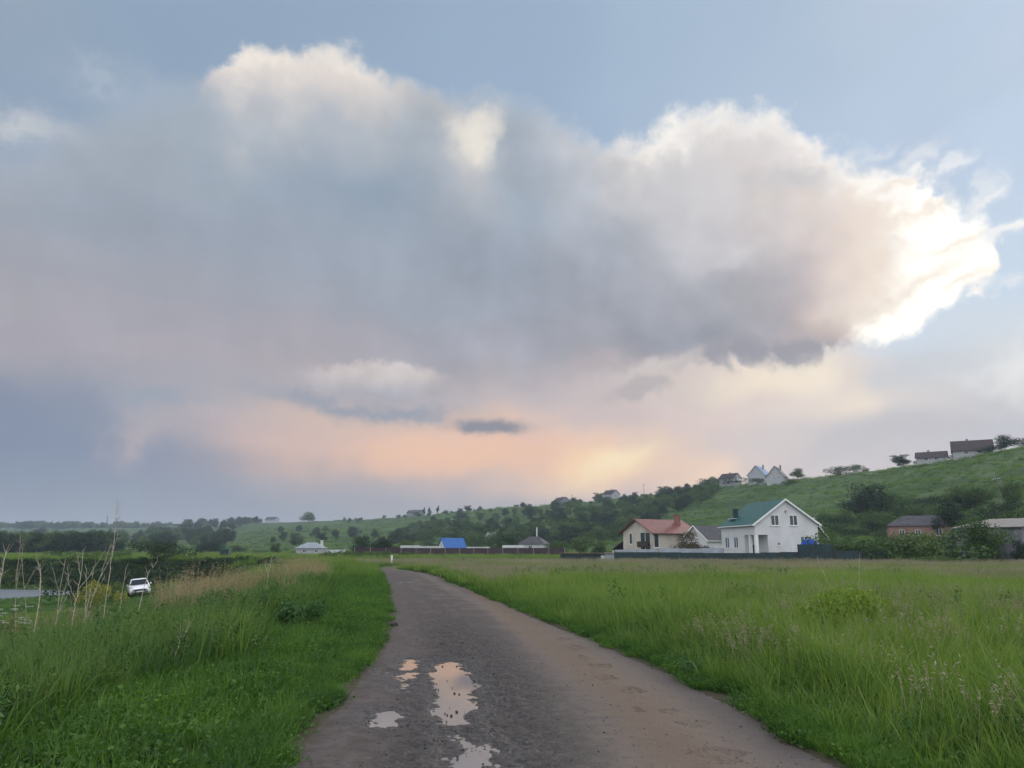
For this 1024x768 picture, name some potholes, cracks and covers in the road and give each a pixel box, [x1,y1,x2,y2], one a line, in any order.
pothole [391,683,415,692]
pothole [362,707,411,730]
pothole [394,670,421,681]
pothole [397,658,423,670]
pothole [426,660,482,727]
pothole [433,730,512,768]
